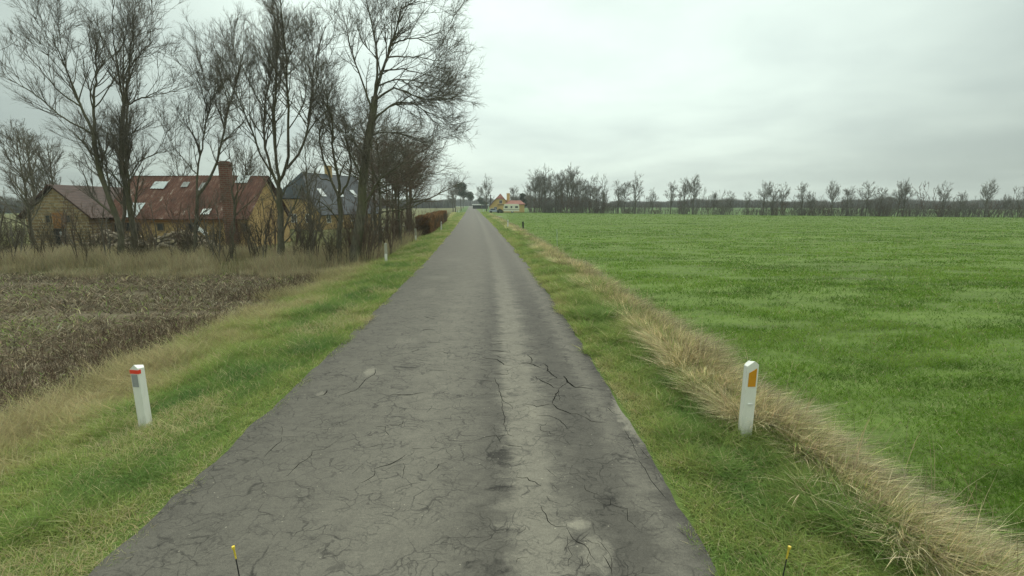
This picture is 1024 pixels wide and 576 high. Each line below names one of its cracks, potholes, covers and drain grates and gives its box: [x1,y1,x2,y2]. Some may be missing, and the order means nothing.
crack [516,344,612,573]
crack [285,316,448,491]
crack [481,341,521,447]
